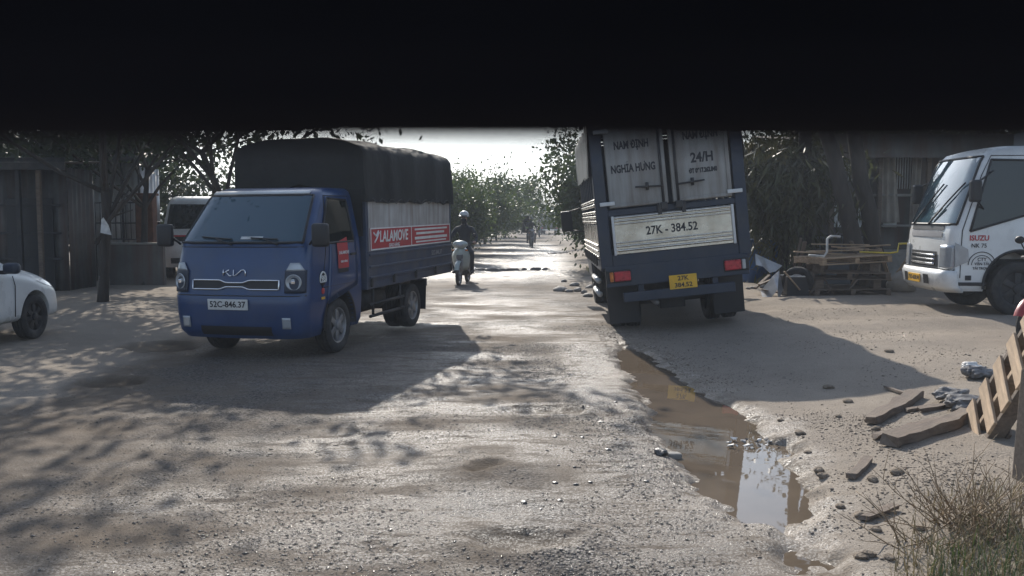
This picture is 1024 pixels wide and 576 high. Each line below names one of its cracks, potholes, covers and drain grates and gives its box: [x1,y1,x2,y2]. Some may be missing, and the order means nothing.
pothole [117,340,200,353]
pothole [457,457,507,472]
pothole [71,375,149,388]
